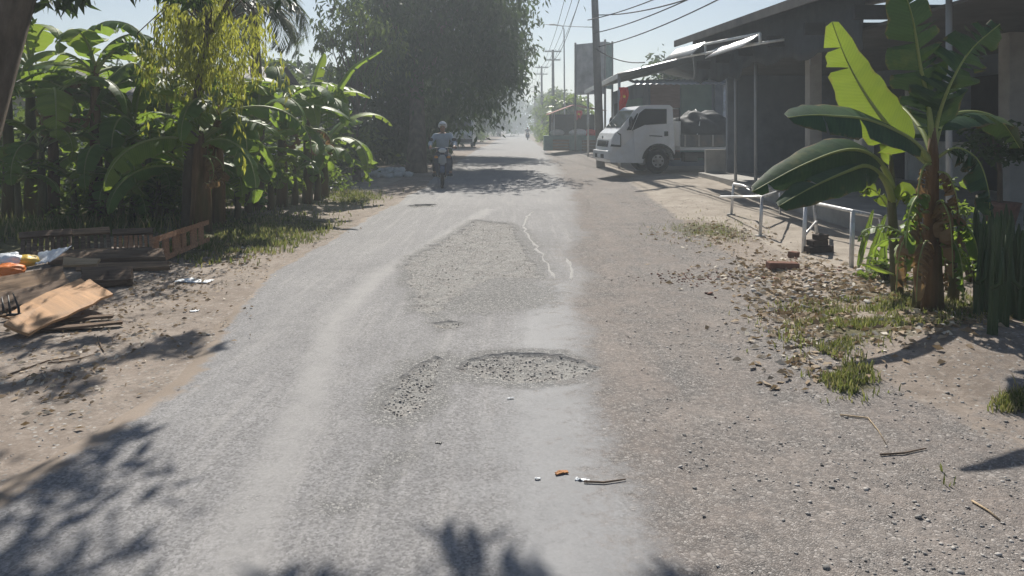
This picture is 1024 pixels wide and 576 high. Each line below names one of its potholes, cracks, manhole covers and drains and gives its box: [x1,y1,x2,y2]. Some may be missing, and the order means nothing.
pothole [455,352,602,384]
crack [522,210,574,280]
pothole [381,356,445,418]
pothole [431,320,465,329]
